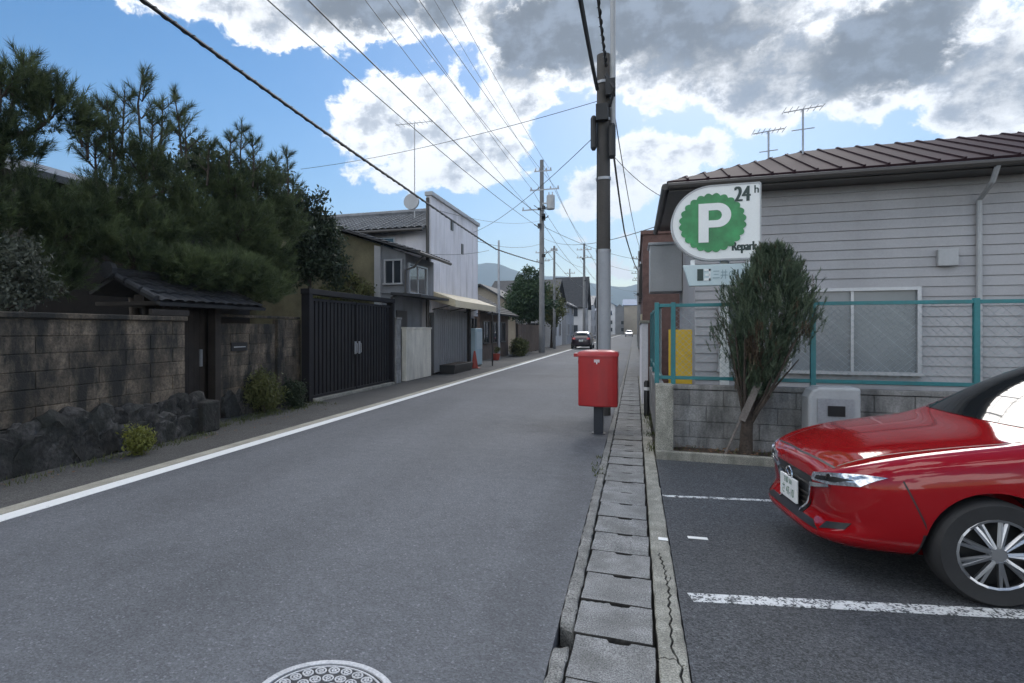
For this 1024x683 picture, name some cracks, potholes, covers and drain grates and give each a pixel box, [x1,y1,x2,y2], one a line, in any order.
crack [657,558,690,683]
manhole cover [262,660,391,683]
